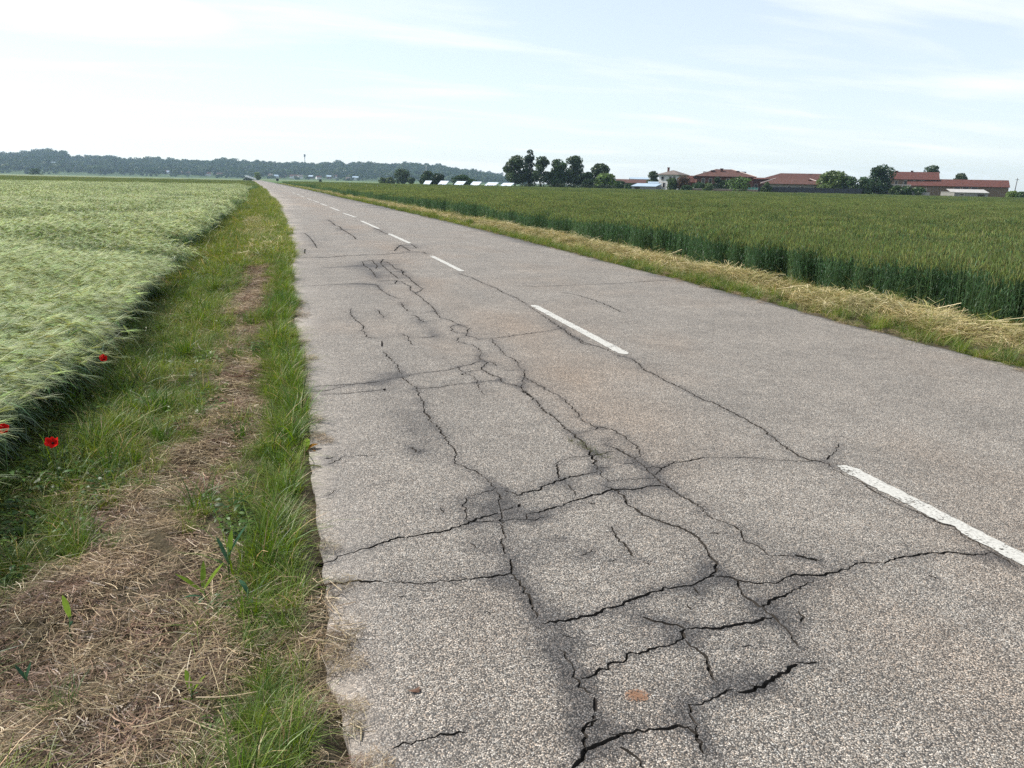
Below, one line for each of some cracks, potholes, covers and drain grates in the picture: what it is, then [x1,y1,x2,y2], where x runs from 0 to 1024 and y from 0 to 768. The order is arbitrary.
crack [304,220,1018,768]
